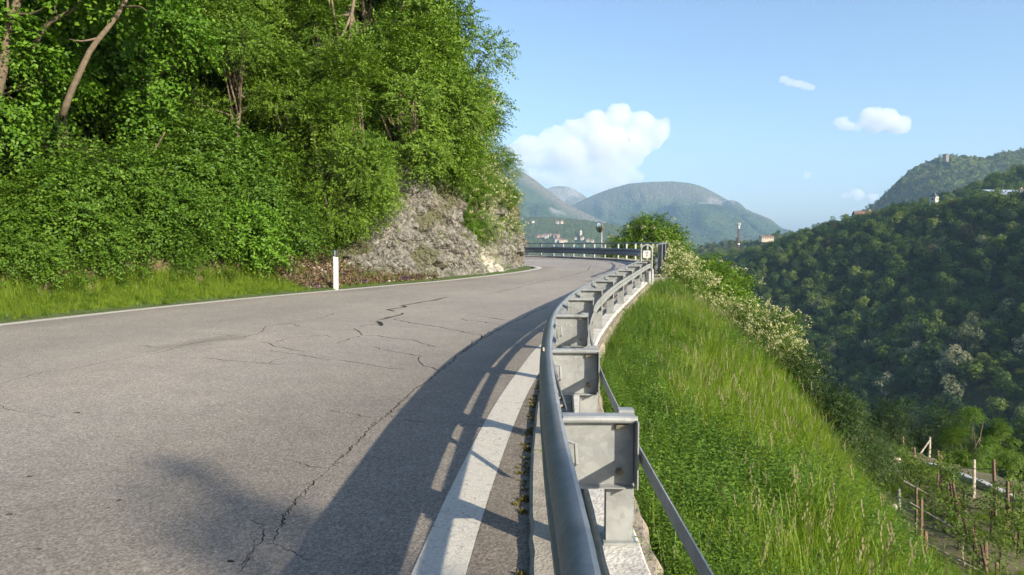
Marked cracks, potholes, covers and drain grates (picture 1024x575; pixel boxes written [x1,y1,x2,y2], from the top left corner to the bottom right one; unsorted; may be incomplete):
crack [9,297,547,573]
